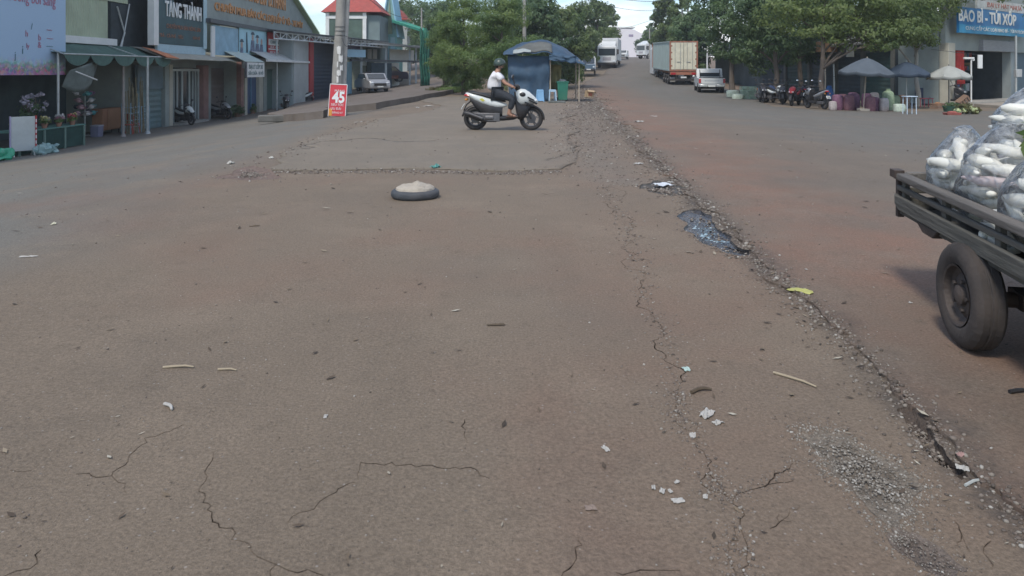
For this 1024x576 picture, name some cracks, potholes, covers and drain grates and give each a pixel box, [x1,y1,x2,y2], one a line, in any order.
crack [603,195,793,576]
crack [289,462,487,521]
crack [80,425,182,490]
crack [198,459,321,575]
pothole [639,180,685,196]
pothole [677,209,751,256]
